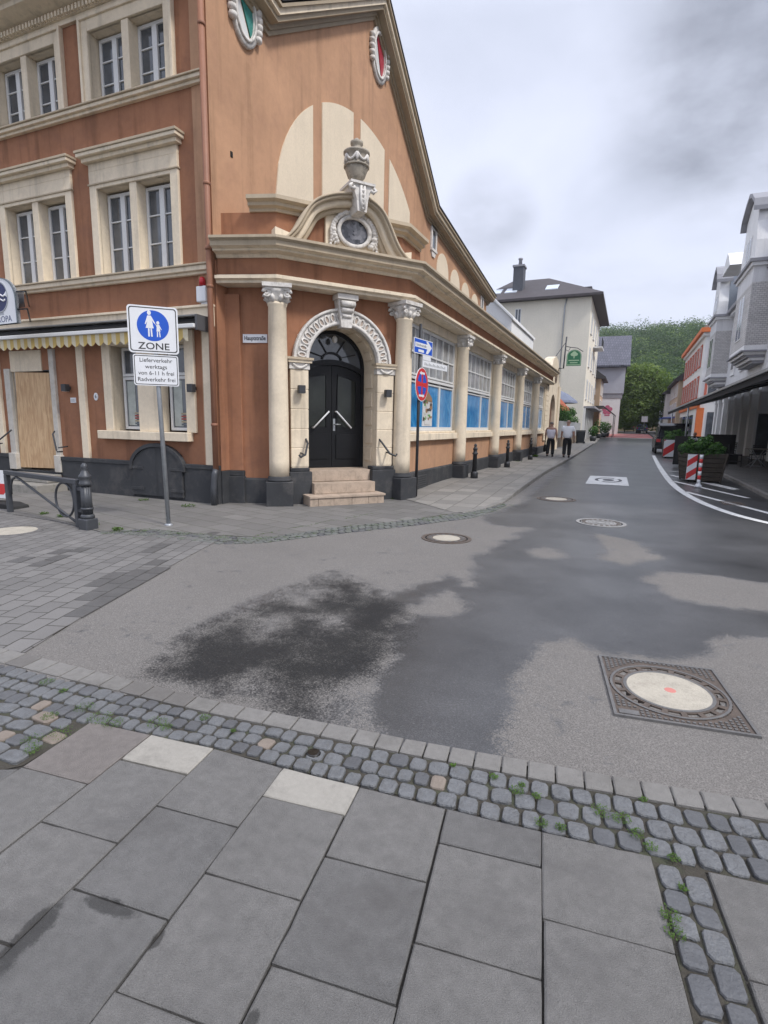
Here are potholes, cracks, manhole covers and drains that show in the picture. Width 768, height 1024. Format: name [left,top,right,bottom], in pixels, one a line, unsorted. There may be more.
manhole cover [0,525,46,536]
manhole cover [598,654,762,739]
manhole cover [576,518,627,528]
manhole cover [421,533,472,544]
